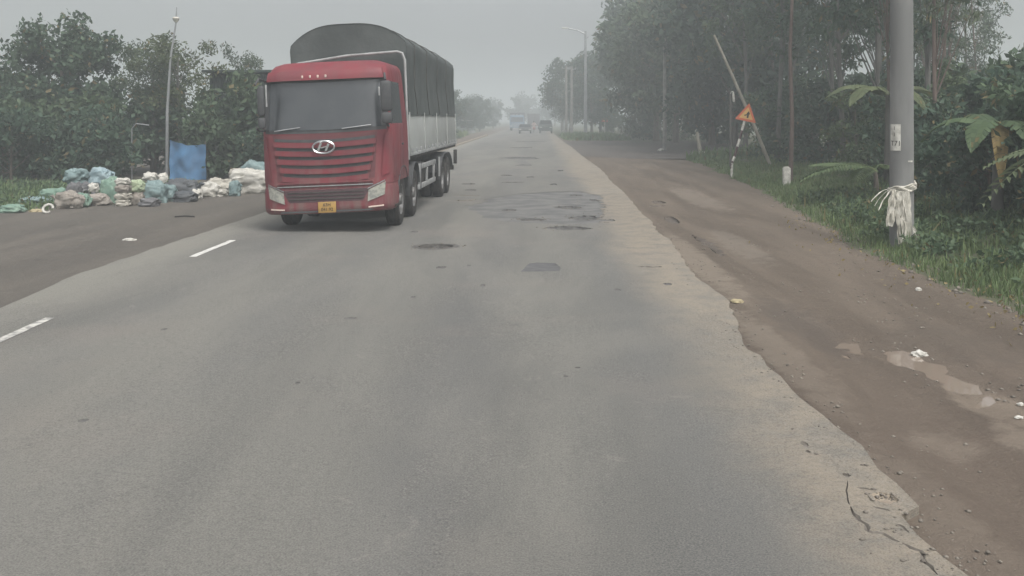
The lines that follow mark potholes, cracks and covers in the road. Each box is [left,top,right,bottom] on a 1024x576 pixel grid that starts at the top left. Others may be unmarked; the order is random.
crack [845,481,938,575]
